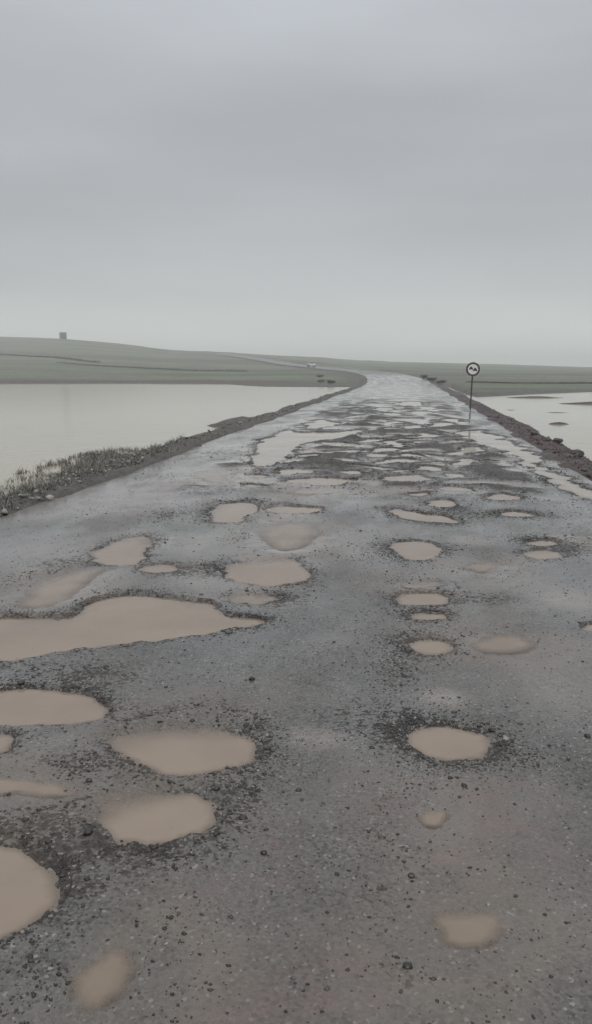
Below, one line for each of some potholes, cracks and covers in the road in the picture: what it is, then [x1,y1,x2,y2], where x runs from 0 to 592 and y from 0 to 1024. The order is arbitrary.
pothole [204,499,263,523]
